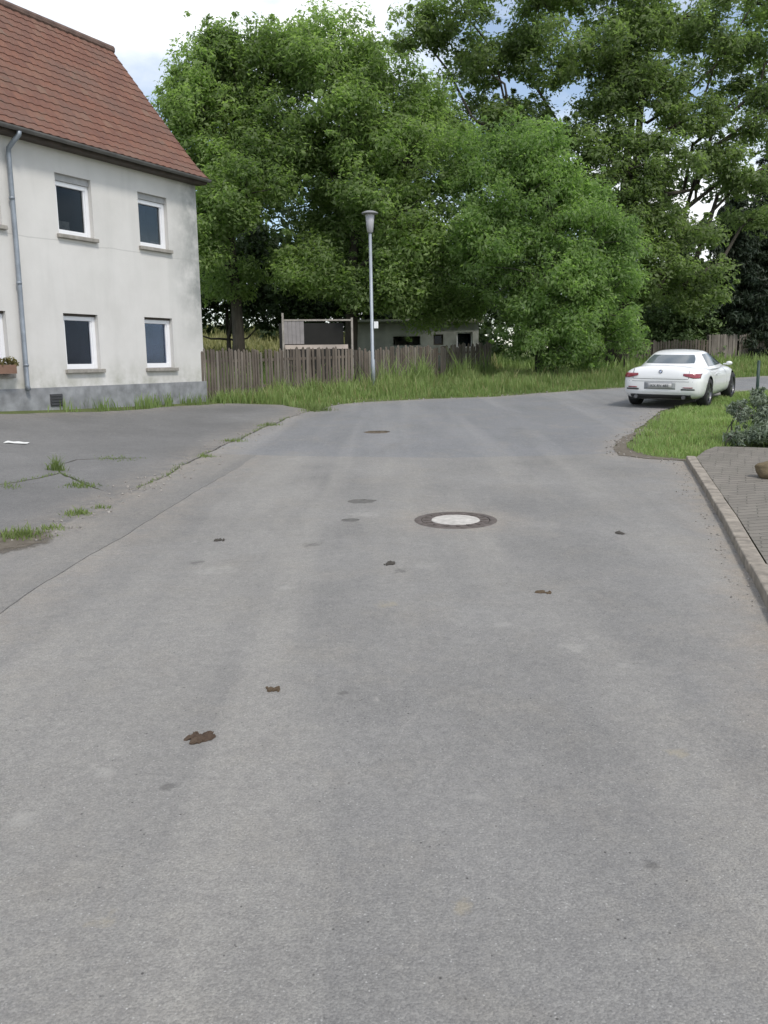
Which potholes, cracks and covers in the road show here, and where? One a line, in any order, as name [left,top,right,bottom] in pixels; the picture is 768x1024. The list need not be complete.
manhole cover [414,512,497,529]
crack [0,458,118,490]
